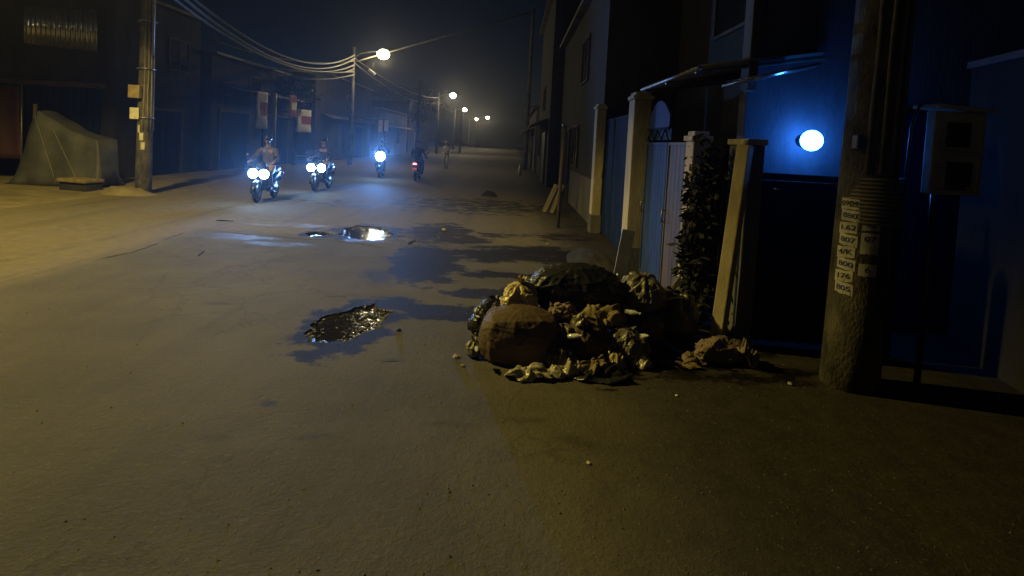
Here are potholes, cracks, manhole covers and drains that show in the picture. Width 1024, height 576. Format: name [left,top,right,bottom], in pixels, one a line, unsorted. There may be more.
pothole [304,303,393,343]
pothole [338,225,394,240]
crack [102,232,204,259]
